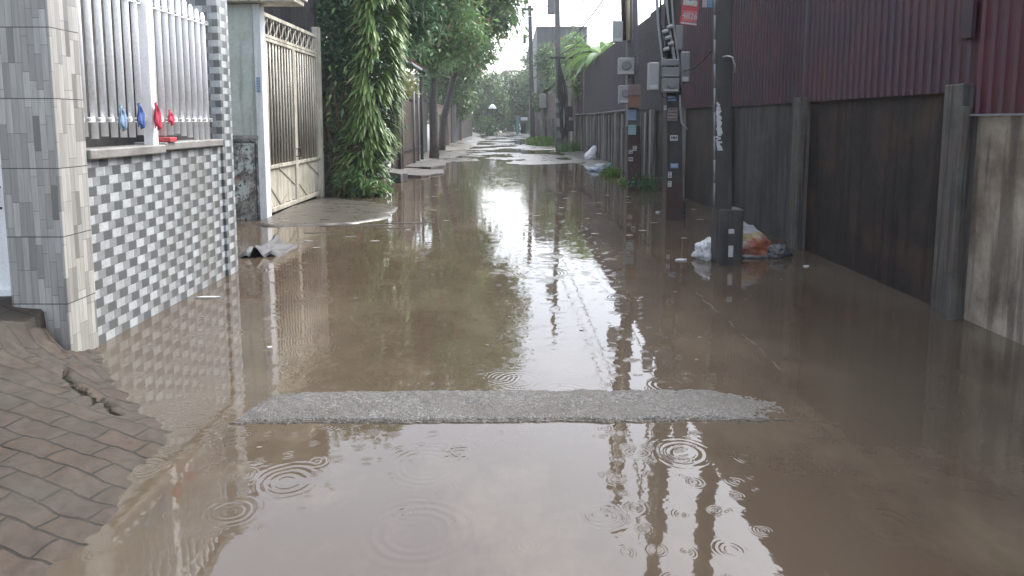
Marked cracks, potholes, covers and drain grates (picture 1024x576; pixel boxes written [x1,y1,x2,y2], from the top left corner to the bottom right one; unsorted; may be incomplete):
crack [62,371,121,416]
